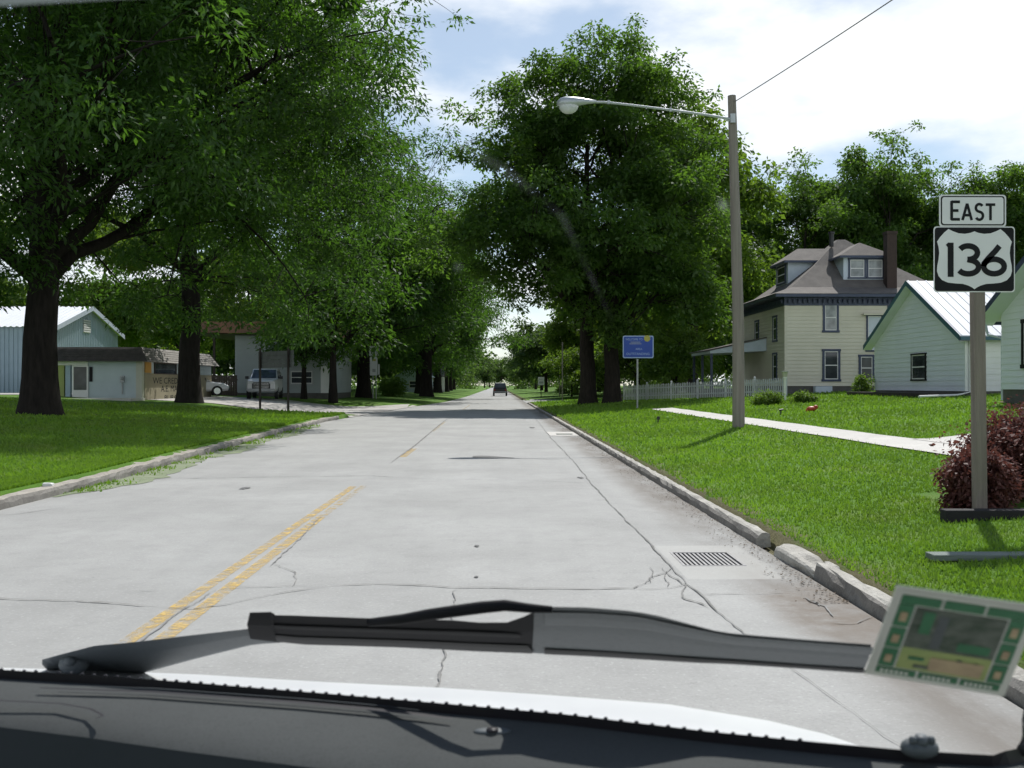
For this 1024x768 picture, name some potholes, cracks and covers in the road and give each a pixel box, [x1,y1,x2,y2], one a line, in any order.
drain grate [670,552,747,566]
crack [342,424,899,744]
